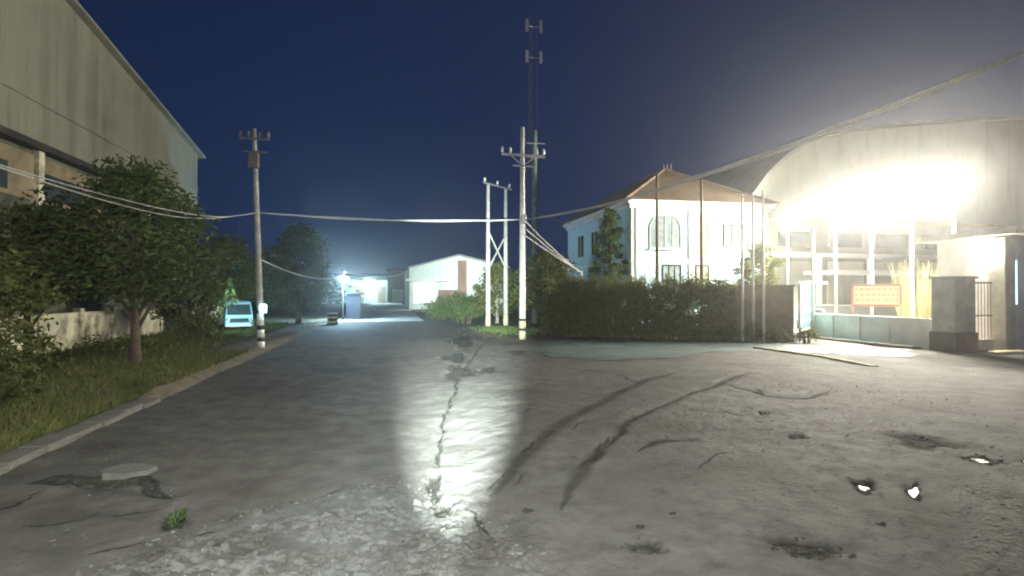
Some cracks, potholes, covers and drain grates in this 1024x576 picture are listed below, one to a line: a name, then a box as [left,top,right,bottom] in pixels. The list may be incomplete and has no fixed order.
crack [435,341,524,492]
pothole [889,435,956,450]
pothole [904,484,923,502]
pothole [850,480,875,495]
pothole [621,537,670,554]
pothole [770,537,857,561]
crack [464,509,493,539]
crack [0,490,171,527]
pothole [960,453,1009,466]
